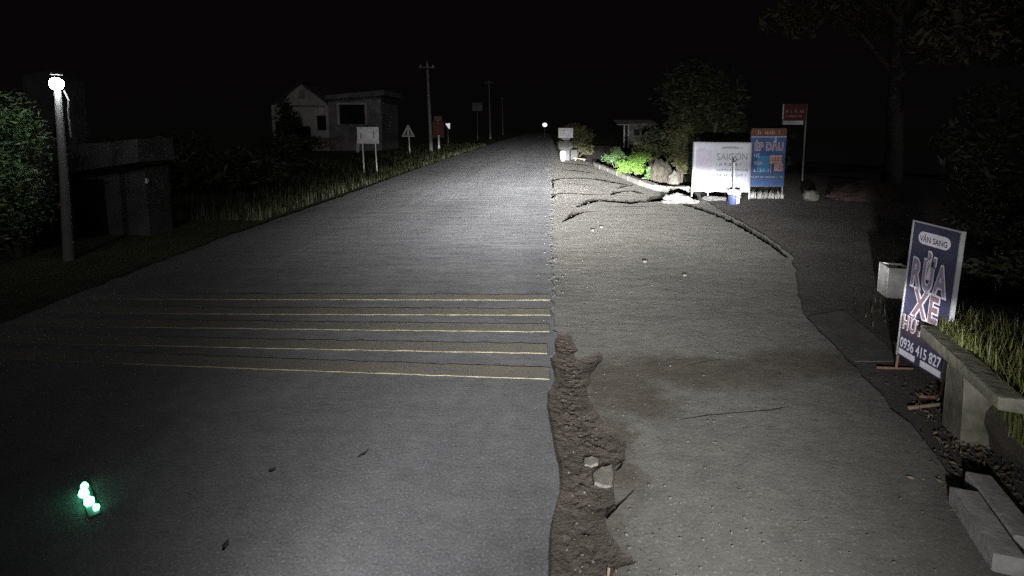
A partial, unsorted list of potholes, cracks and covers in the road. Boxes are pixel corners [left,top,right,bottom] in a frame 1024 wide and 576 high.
crack [682,406,789,419]
crack [605,490,635,519]
crack [551,163,651,222]
pothole [547,332,634,576]
